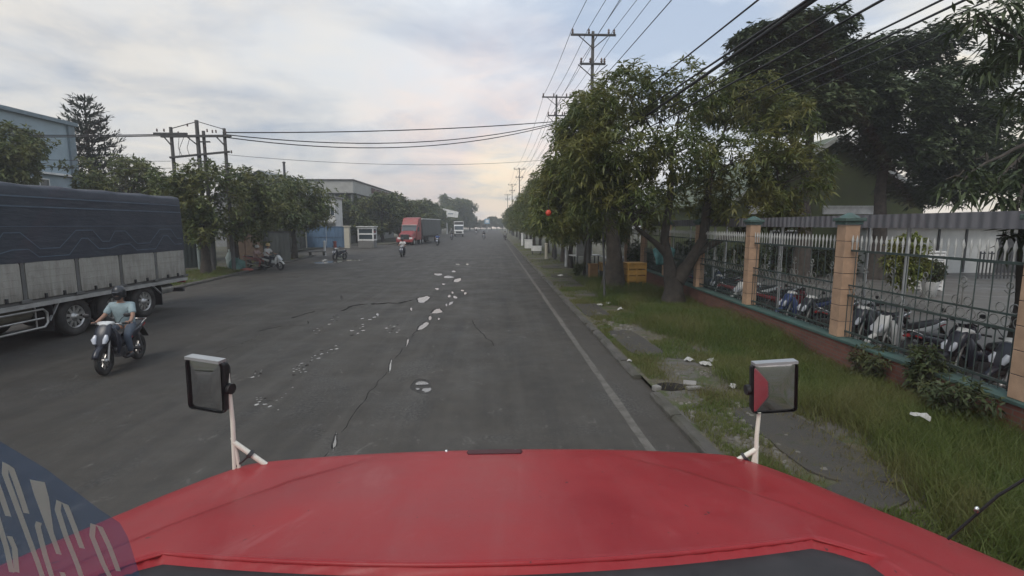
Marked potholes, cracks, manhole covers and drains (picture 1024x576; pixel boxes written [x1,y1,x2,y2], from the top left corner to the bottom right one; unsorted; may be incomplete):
pothole [410,378,433,394]
crack [216,300,418,457]
drain grate [652,380,701,392]
